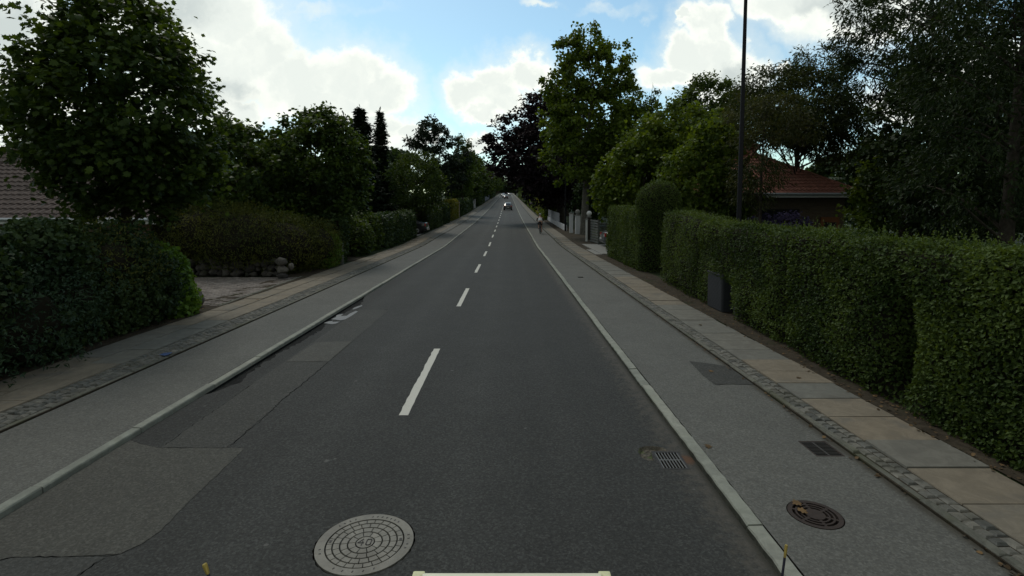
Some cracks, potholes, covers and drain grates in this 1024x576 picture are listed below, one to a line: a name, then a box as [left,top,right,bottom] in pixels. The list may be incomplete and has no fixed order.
drain grate [798,441,844,456]
manhole cover [314,514,414,576]
drain grate [652,452,690,469]
